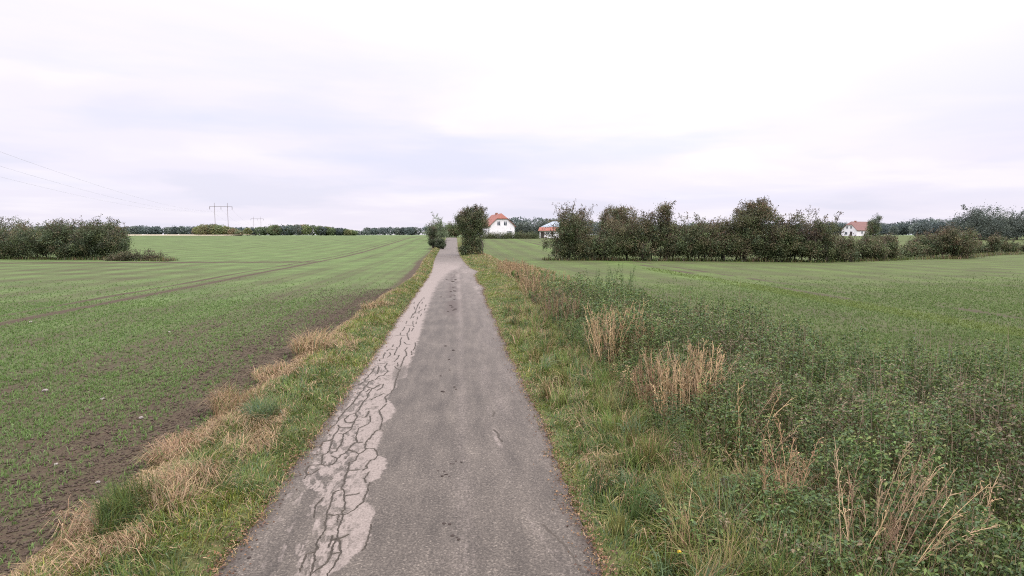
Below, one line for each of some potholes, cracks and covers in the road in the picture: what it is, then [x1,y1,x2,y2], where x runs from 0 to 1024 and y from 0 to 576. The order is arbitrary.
crack [299,299,426,576]
